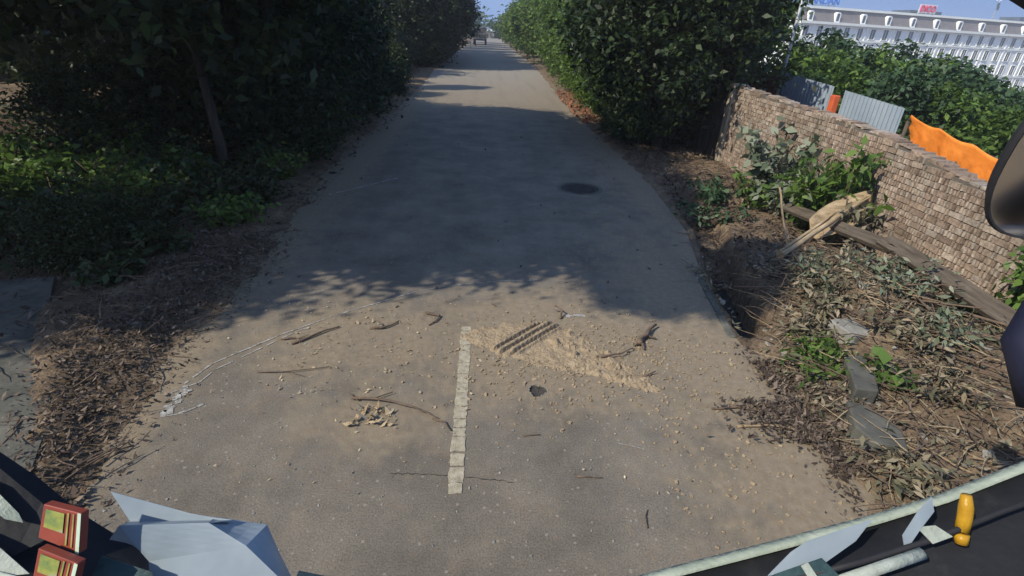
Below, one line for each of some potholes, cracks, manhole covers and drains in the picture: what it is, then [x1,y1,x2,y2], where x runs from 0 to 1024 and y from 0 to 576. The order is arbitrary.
crack [390,472,514,483]
pothole [528,384,548,397]
manhole cover [557,182,603,195]
